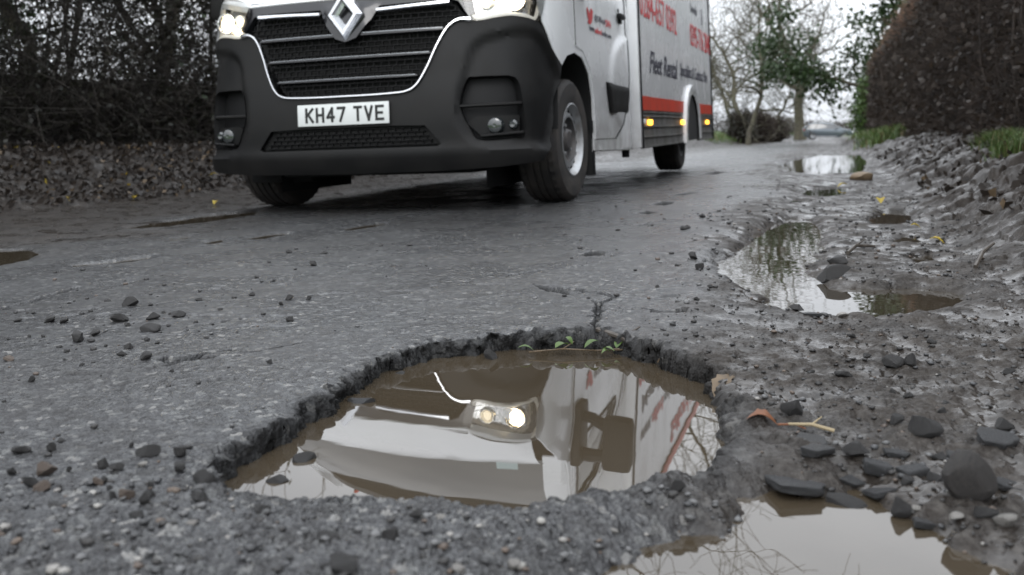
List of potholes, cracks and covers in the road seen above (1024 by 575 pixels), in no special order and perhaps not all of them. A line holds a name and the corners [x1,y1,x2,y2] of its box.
pothole [769,148,878,174]
pothole [538,453,1024,575]
crack [507,264,620,336]
pothole [693,211,1000,319]
pothole [178,325,798,519]
